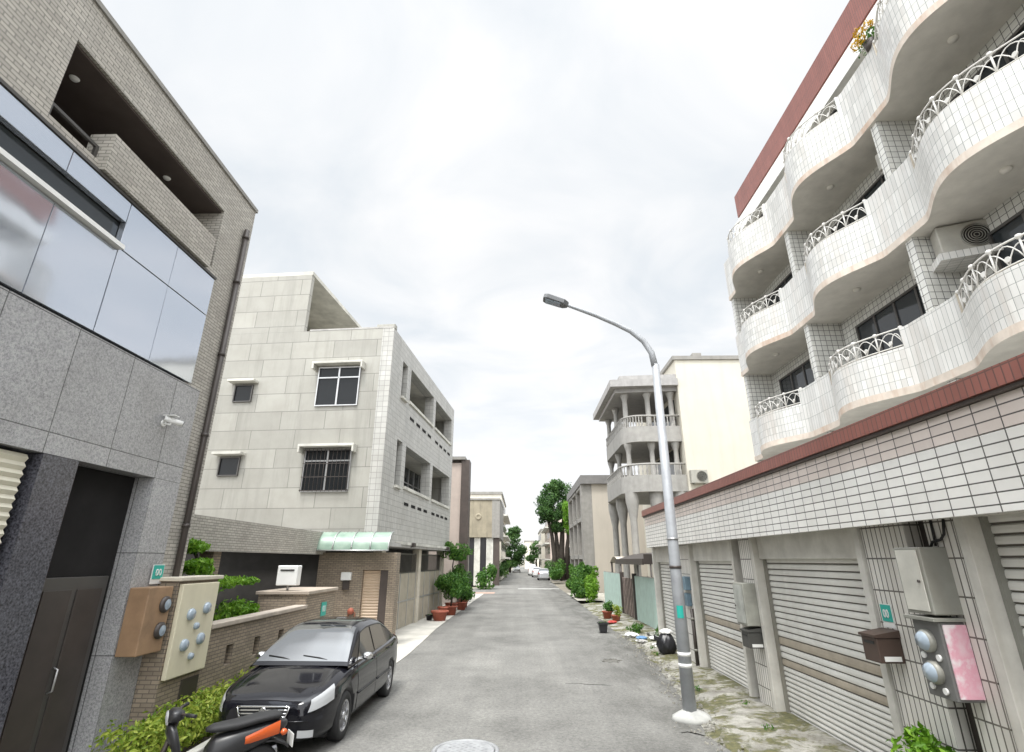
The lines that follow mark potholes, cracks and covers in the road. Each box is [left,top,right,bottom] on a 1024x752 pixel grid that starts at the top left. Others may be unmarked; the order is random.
manhole cover [431,739,499,752]
